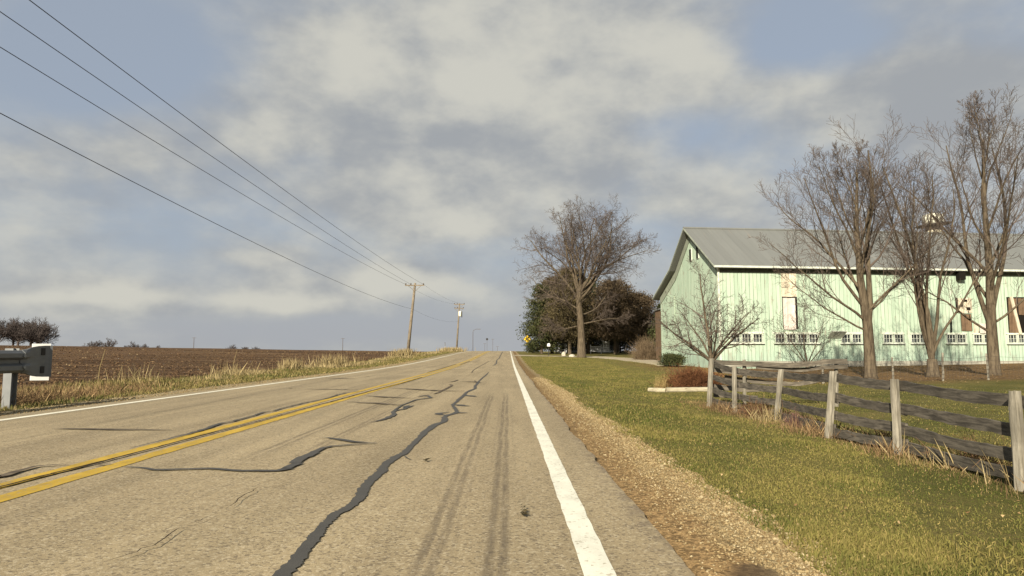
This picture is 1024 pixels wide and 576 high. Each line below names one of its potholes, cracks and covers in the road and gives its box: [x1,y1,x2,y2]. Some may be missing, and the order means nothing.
crack [347,361,489,411]
crack [104,487,258,562]
